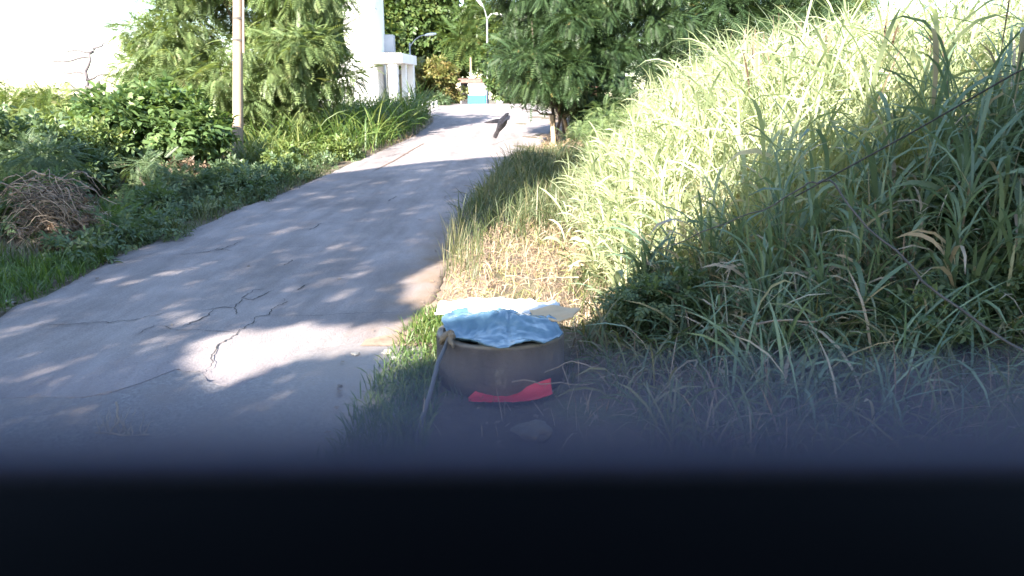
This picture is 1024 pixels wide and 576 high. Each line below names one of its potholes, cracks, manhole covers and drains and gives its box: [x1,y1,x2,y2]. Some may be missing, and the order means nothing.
crack [38,284,307,372]
